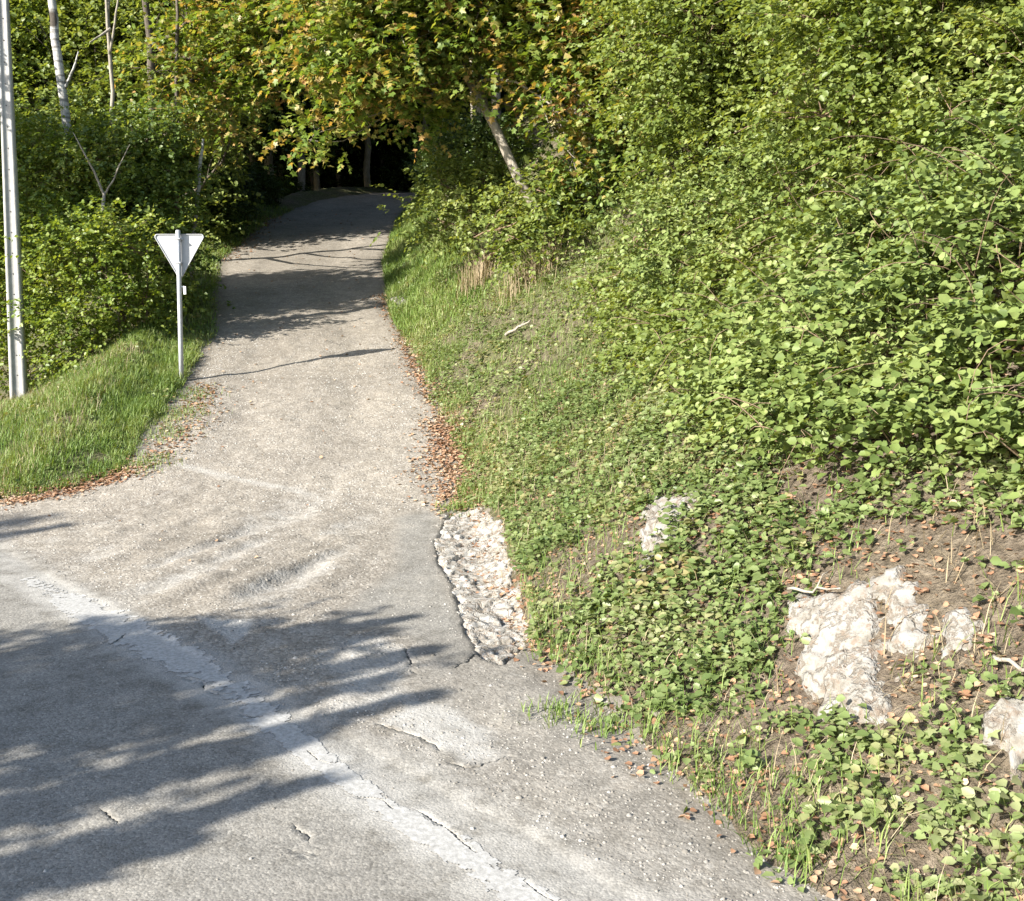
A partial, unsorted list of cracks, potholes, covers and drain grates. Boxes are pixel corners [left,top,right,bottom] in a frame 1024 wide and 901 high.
crack [307,719,525,772]
crack [86,802,132,832]
crack [444,651,481,672]
crack [393,645,425,678]
crack [276,818,332,867]
